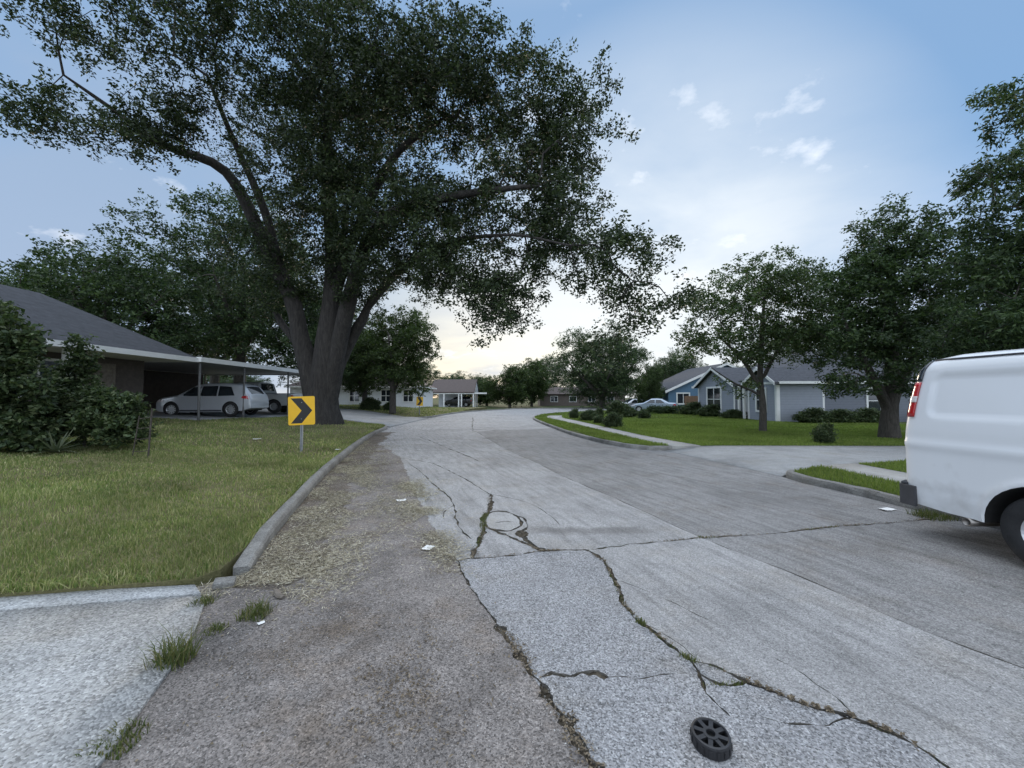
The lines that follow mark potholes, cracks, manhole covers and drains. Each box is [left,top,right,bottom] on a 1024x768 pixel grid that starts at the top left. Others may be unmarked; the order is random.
crack [408,418,951,768]
